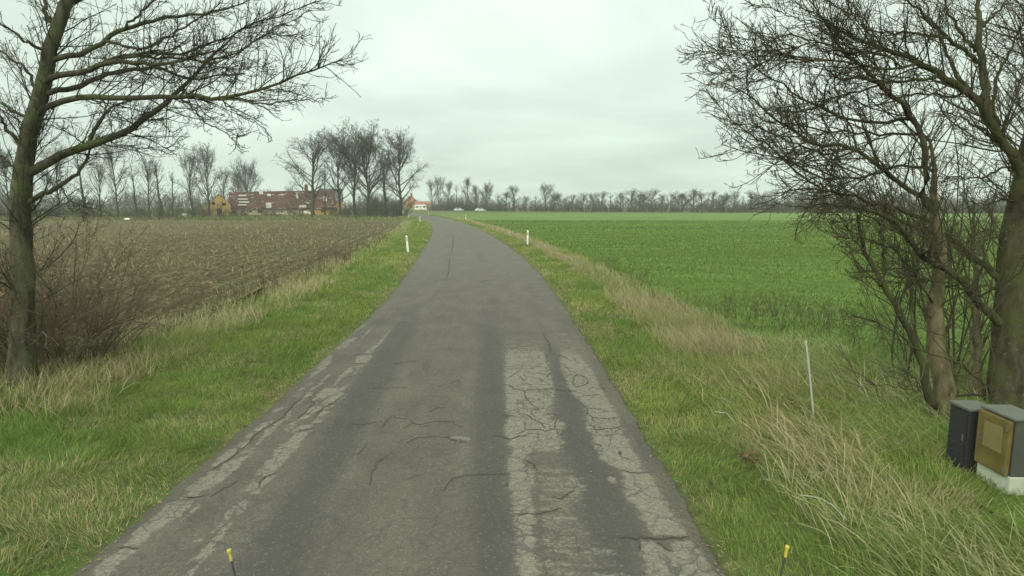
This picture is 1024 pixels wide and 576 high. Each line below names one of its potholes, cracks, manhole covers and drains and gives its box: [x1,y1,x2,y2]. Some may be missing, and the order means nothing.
crack [189,394,341,498]
crack [494,335,619,447]
crack [366,407,458,442]
crack [619,536,688,552]
crack [516,491,573,514]
